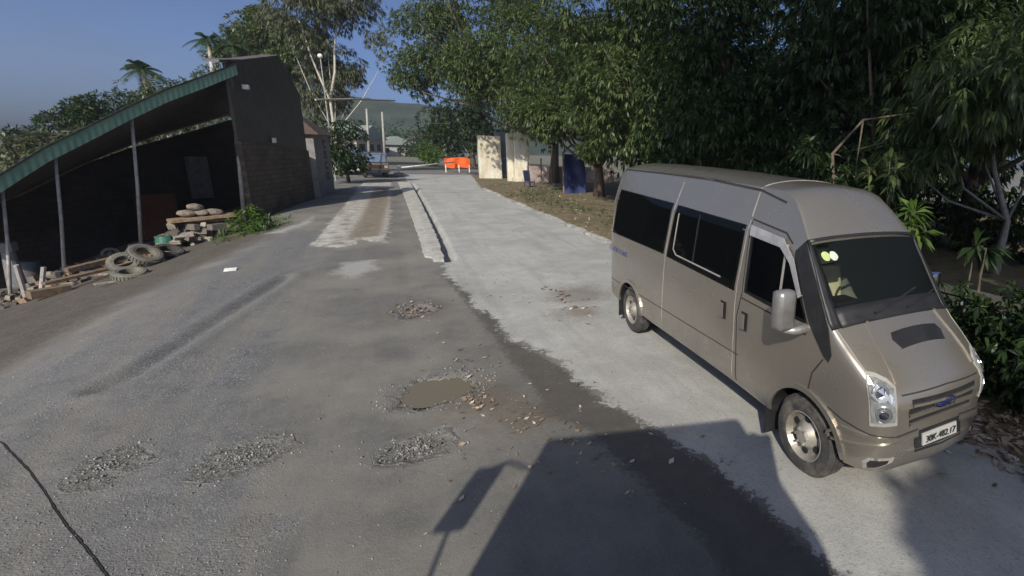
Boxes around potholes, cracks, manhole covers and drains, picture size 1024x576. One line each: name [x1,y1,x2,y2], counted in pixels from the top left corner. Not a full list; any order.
pothole [161,418,341,513]
pothole [37,439,162,515]
pothole [330,424,493,483]
pothole [388,300,438,322]
pothole [369,367,498,417]
